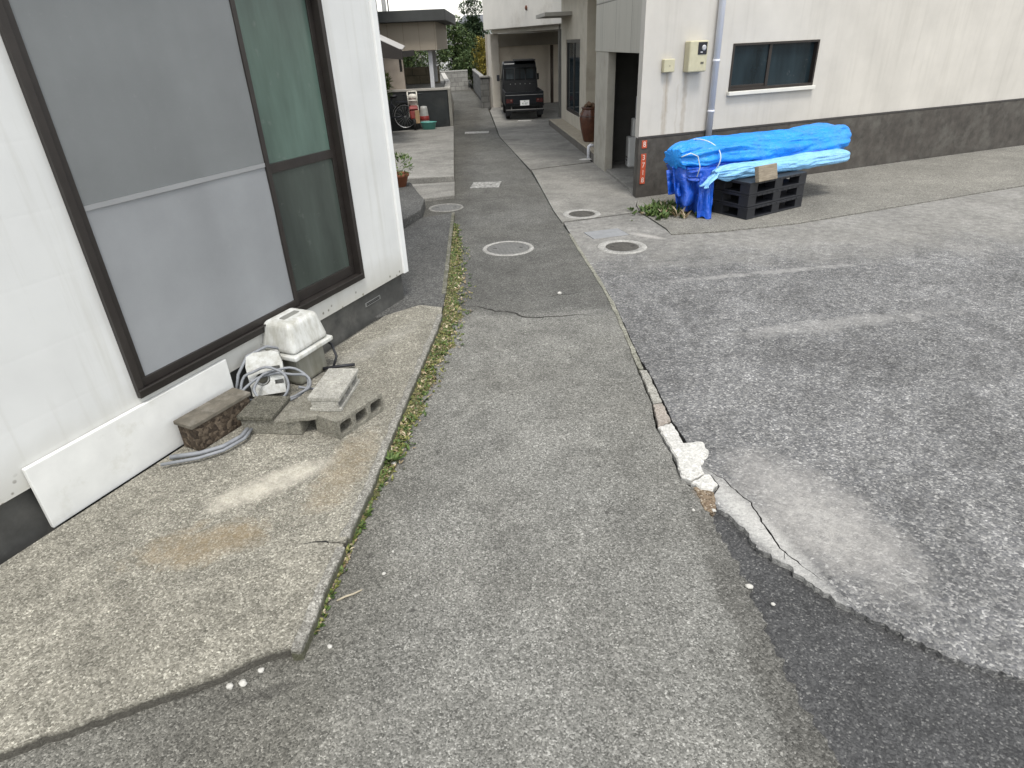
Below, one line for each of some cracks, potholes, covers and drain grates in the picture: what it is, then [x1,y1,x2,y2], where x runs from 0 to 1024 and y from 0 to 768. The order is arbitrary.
crack [725,480,799,563]
manhole cover [428,203,464,212]
crack [473,292,577,318]
manhole cover [482,241,534,256]
manhole cover [597,240,647,254]
manhole cover [563,209,601,219]
